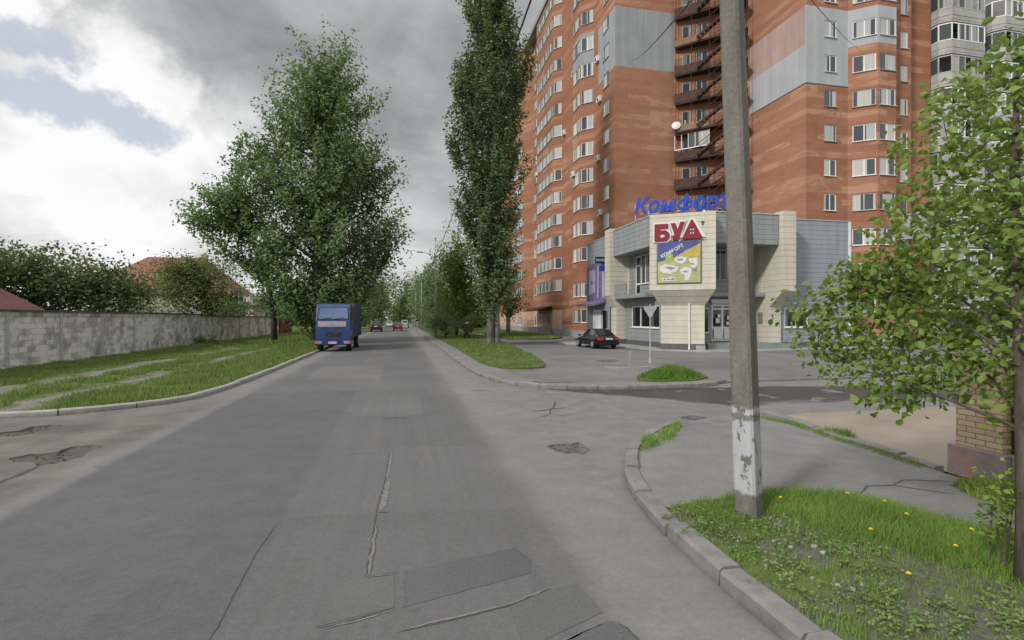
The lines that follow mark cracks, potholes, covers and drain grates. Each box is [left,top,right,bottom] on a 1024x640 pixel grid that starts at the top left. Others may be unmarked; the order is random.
pothole [547,442,591,455]
crack [861,480,951,494]
crack [208,524,277,640]
crack [534,401,571,417]
crack [318,587,640,640]
pothole [9,445,105,466]
pothole [0,425,64,436]
